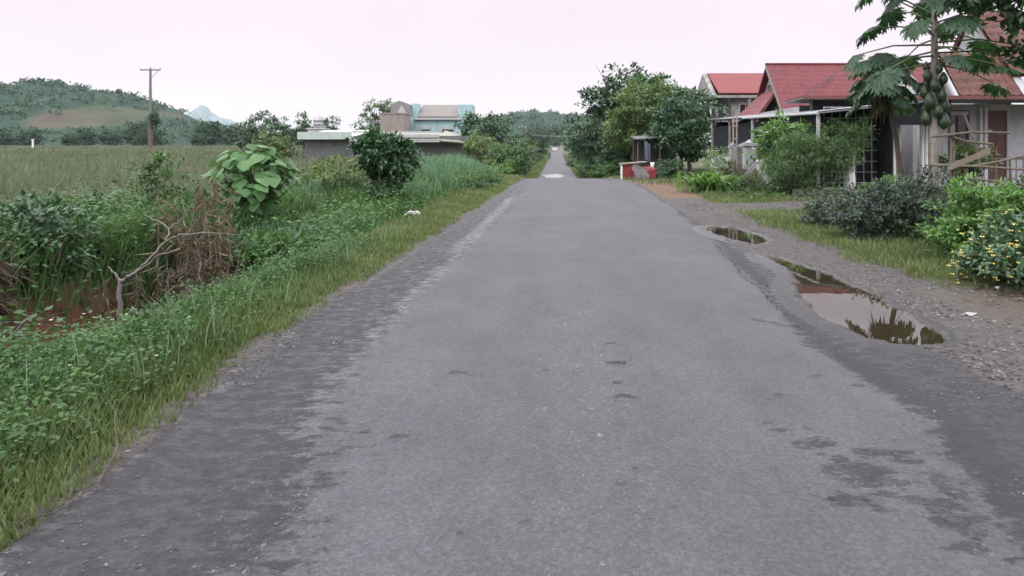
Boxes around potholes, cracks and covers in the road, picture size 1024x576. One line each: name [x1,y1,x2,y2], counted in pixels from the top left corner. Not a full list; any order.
pothole [376,431,422,443]
pothole [754,253,960,348]
pothole [592,360,635,368]
pothole [703,225,774,245]
pothole [601,392,649,402]
